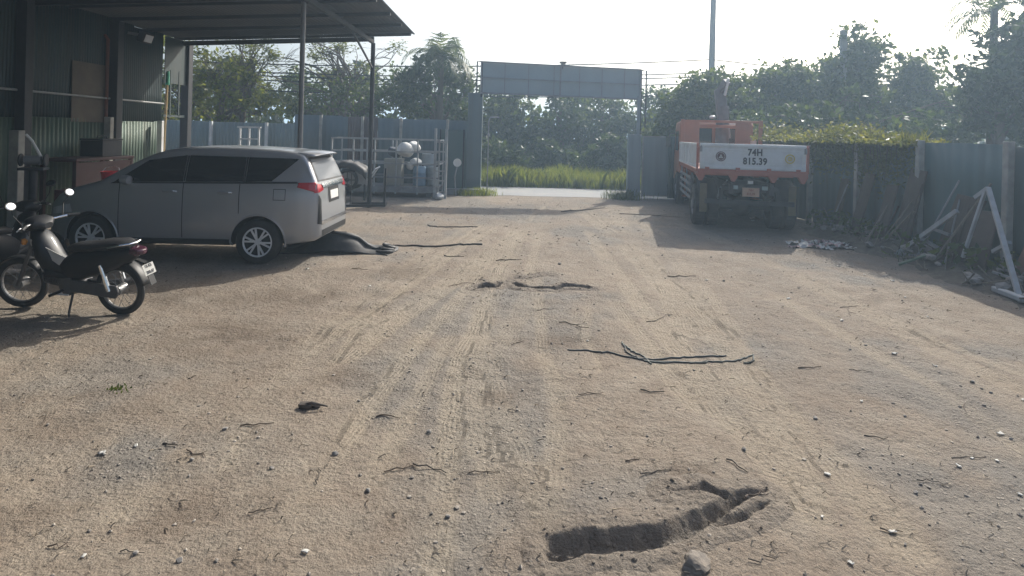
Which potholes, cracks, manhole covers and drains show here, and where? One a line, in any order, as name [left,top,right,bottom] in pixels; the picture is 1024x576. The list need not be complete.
pothole [520,473,794,576]
